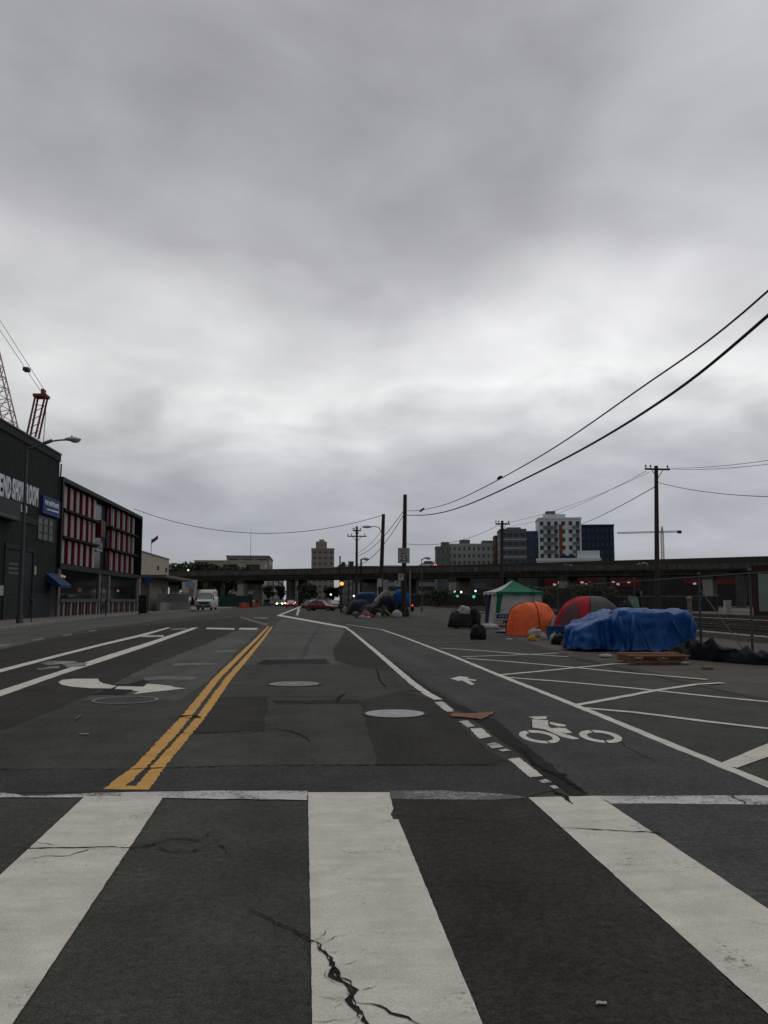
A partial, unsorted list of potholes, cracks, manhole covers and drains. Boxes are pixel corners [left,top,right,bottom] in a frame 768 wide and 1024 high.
manhole cover [362,709,428,718]
crack [557,826,664,834]
crack [178,715,311,741]
crack [6,829,227,859]
manhole cover [91,696,159,704]
crack [248,907,419,1024]
